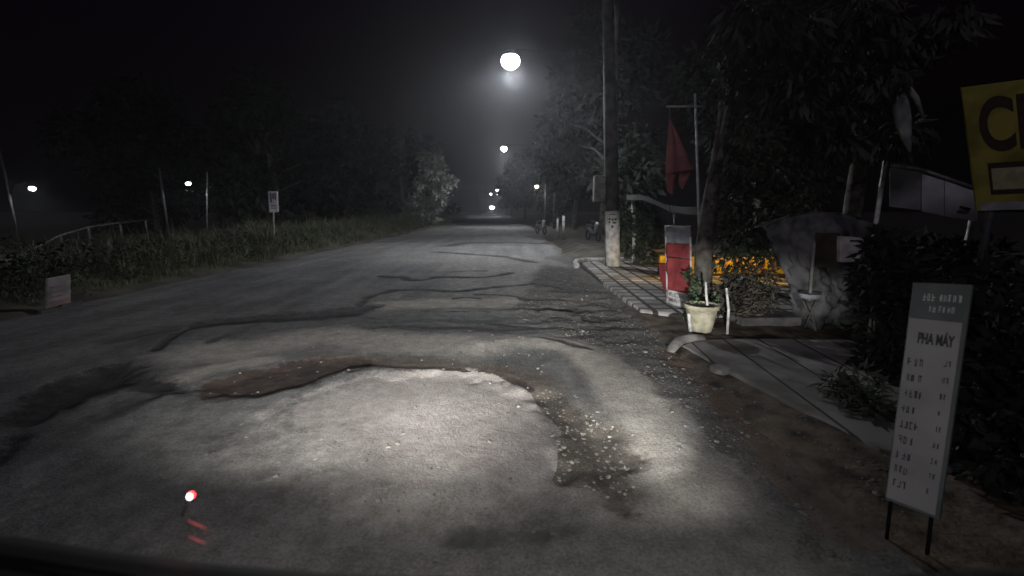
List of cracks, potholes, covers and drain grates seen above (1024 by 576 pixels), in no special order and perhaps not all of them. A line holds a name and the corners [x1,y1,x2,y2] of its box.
crack [347,270,565,313]
crack [138,330,238,353]
crack [533,336,600,352]
pothole [532,380,681,530]
